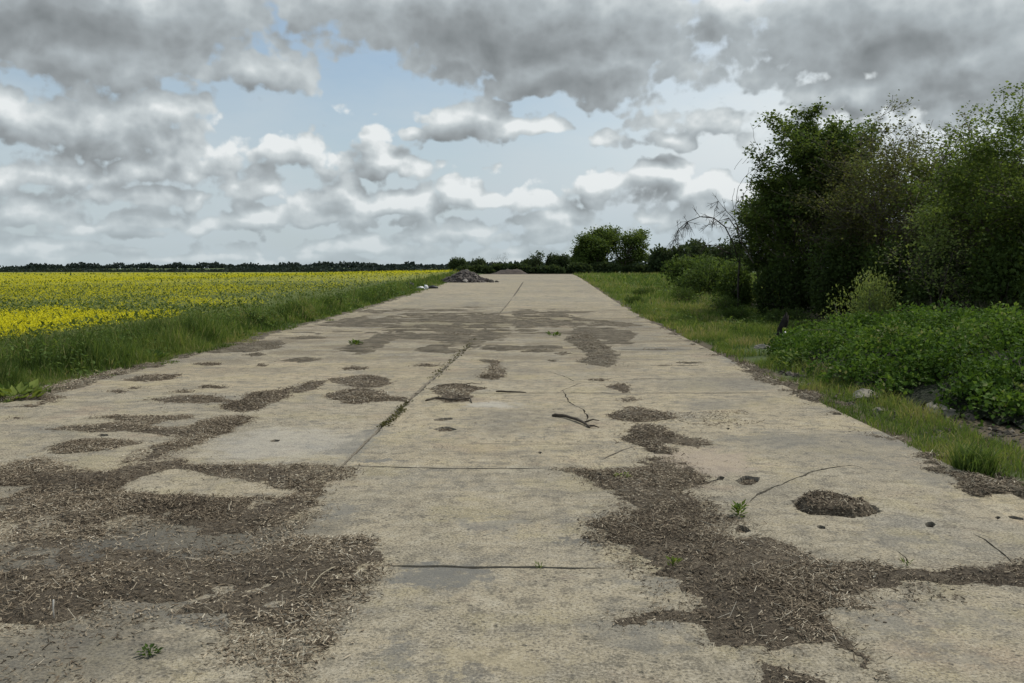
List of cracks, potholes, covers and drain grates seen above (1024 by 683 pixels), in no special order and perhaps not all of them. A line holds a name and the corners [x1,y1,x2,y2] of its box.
crack [555,373,680,420]
crack [750,465,861,502]
crack [974,534,1010,561]
